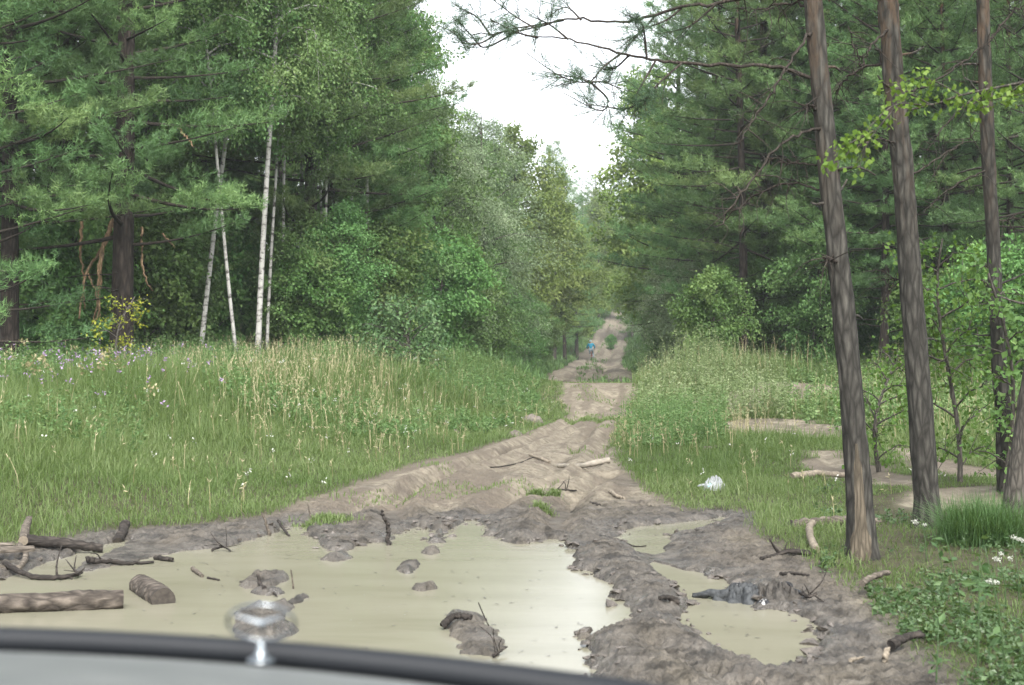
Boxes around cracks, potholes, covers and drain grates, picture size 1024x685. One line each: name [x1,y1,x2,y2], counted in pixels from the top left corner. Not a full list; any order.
pothole [601,512,733,555]
pothole [0,516,642,674]
pothole [650,562,839,666]
